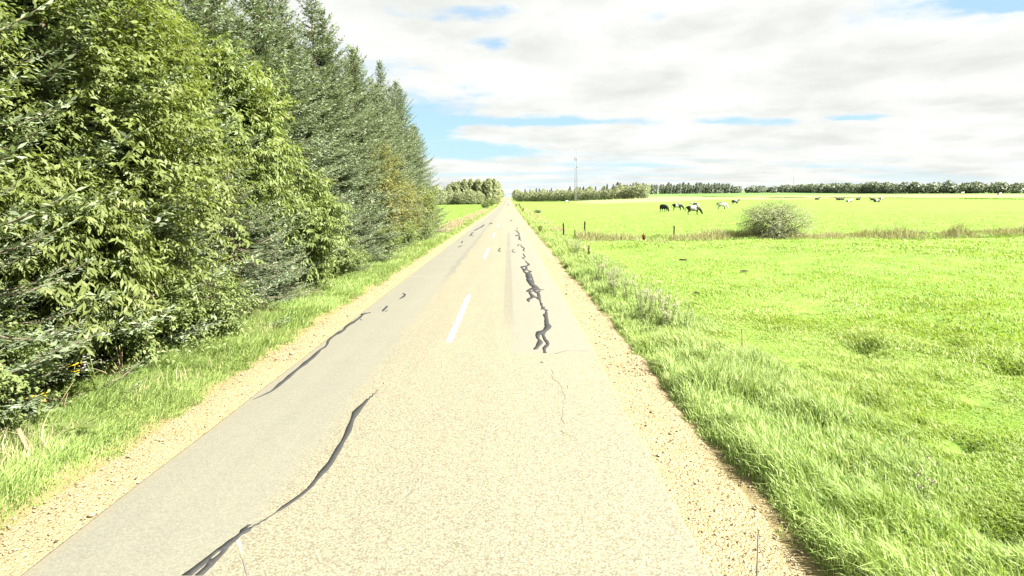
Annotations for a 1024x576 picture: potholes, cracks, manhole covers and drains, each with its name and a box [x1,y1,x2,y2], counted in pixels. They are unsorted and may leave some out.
crack [498,204,585,440]
